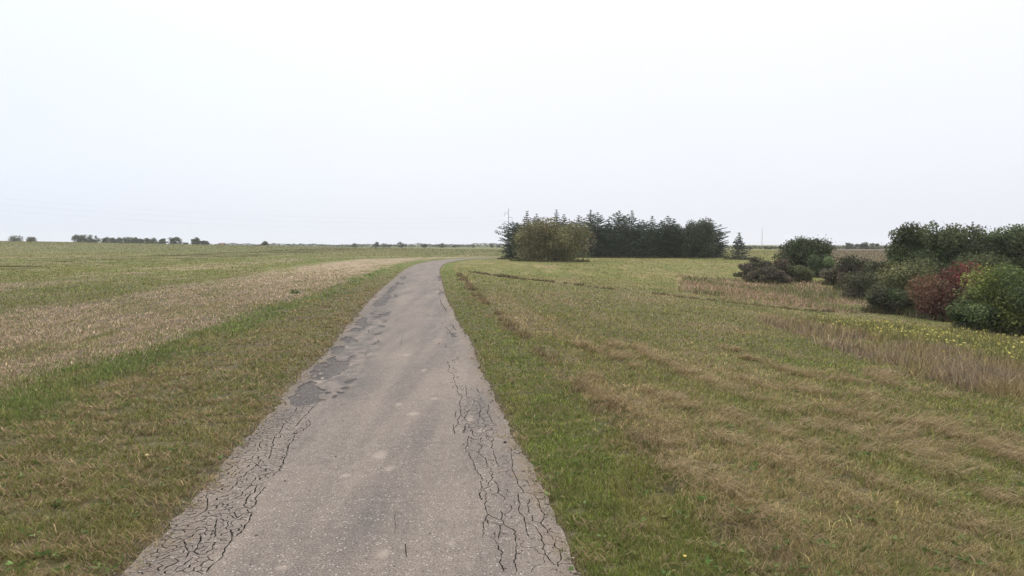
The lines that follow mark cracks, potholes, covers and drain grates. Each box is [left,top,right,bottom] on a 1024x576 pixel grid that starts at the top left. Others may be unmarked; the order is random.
crack [136,402,317,575]
crack [447,364,570,572]
